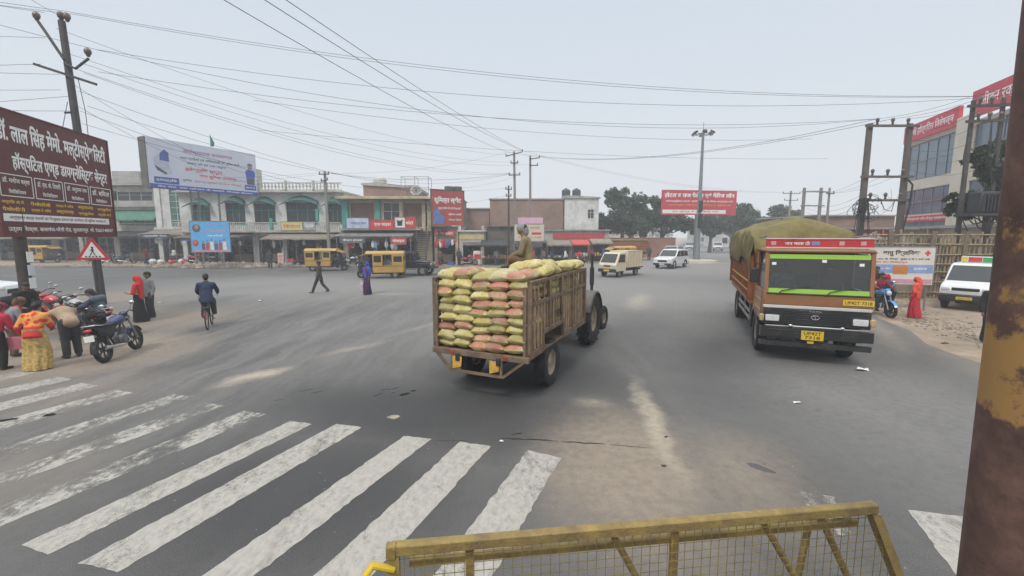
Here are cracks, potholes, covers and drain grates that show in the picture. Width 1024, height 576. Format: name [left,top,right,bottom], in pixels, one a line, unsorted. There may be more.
crack [438,433,646,448]
pothole [746,463,776,474]
